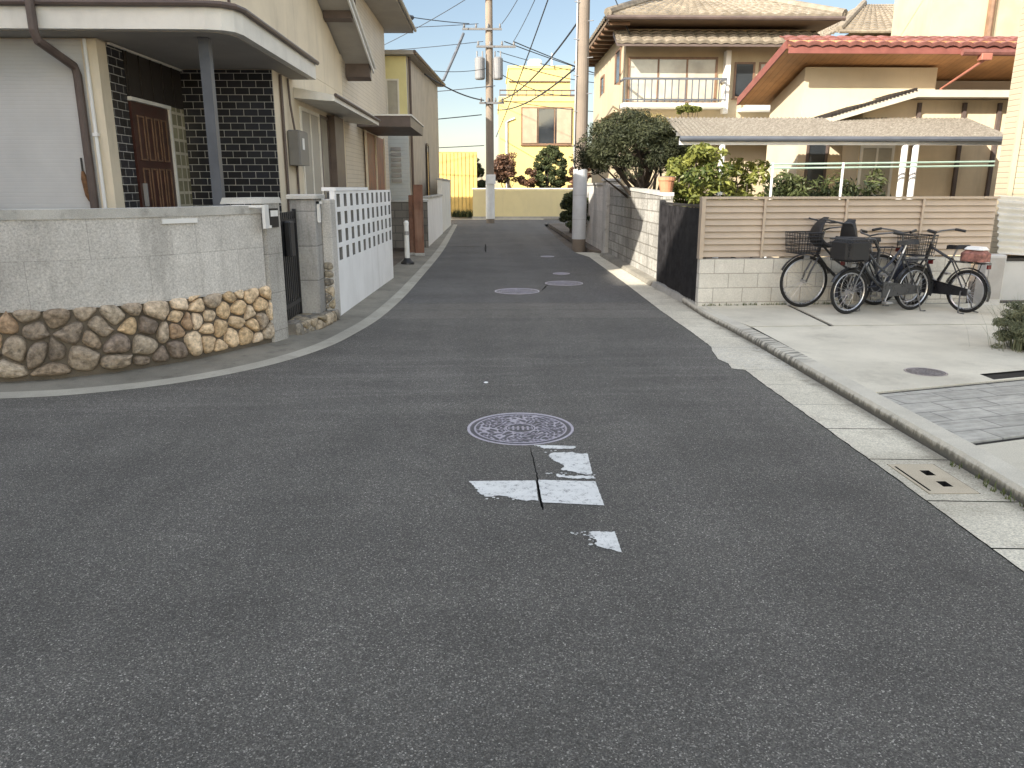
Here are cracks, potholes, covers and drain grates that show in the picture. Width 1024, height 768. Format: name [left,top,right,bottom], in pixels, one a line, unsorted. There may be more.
manhole cover [467,413,574,447]
crack [530,448,544,510]
manhole cover [904,367,948,377]
